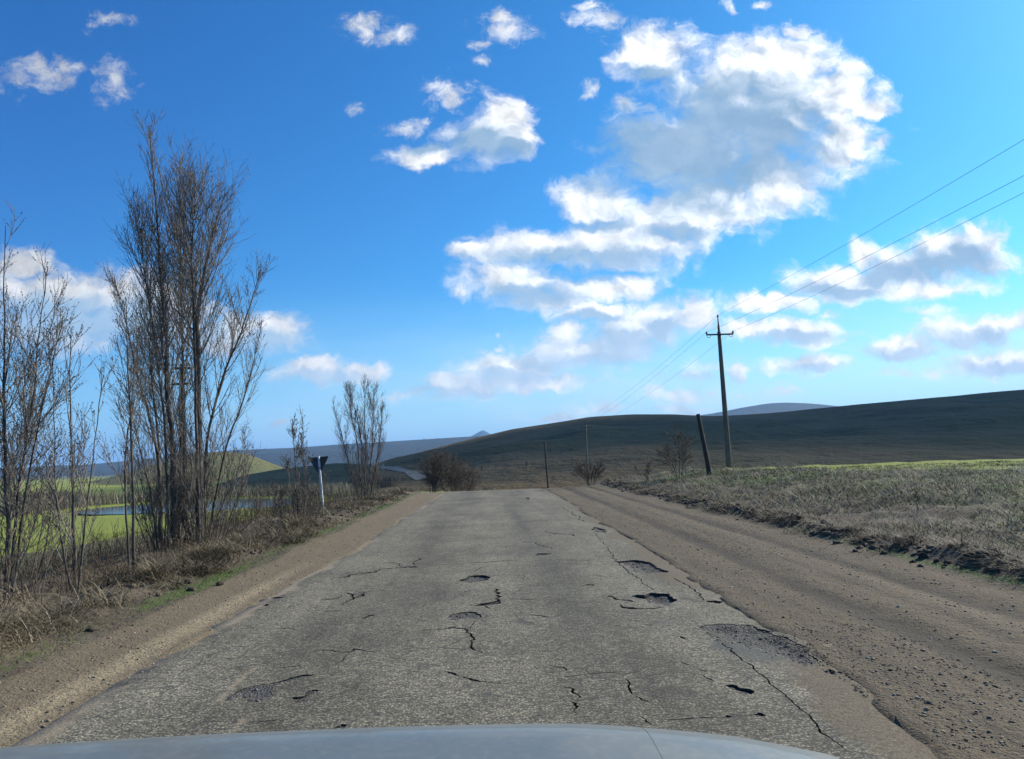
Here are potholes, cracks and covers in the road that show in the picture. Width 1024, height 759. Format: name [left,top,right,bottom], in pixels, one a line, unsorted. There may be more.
pothole [459,575,490,583]
crack [444,671,520,684]
pothole [631,593,677,606]
pothole [615,560,668,573]
pothole [448,612,482,621]
crack [550,659,750,726]
crack [322,558,509,606]
pothole [225,674,316,702]
crack [323,649,371,666]
pothole [700,624,819,666]
crack [416,620,483,653]
